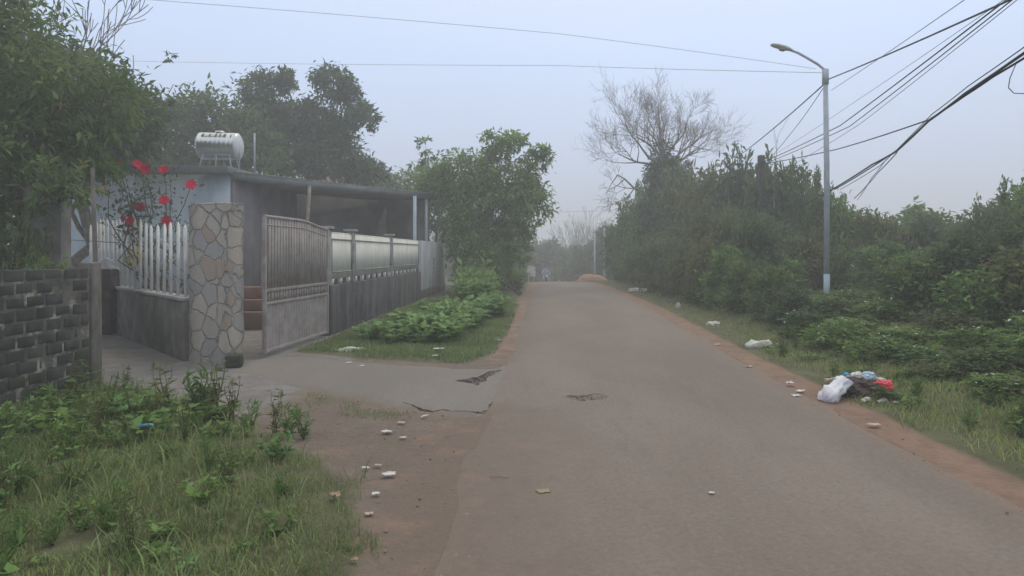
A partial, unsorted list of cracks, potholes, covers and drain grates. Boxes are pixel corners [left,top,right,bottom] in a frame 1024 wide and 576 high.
pothole [563,393,608,401]
crack [404,402,492,414]
pothole [458,370,502,386]
